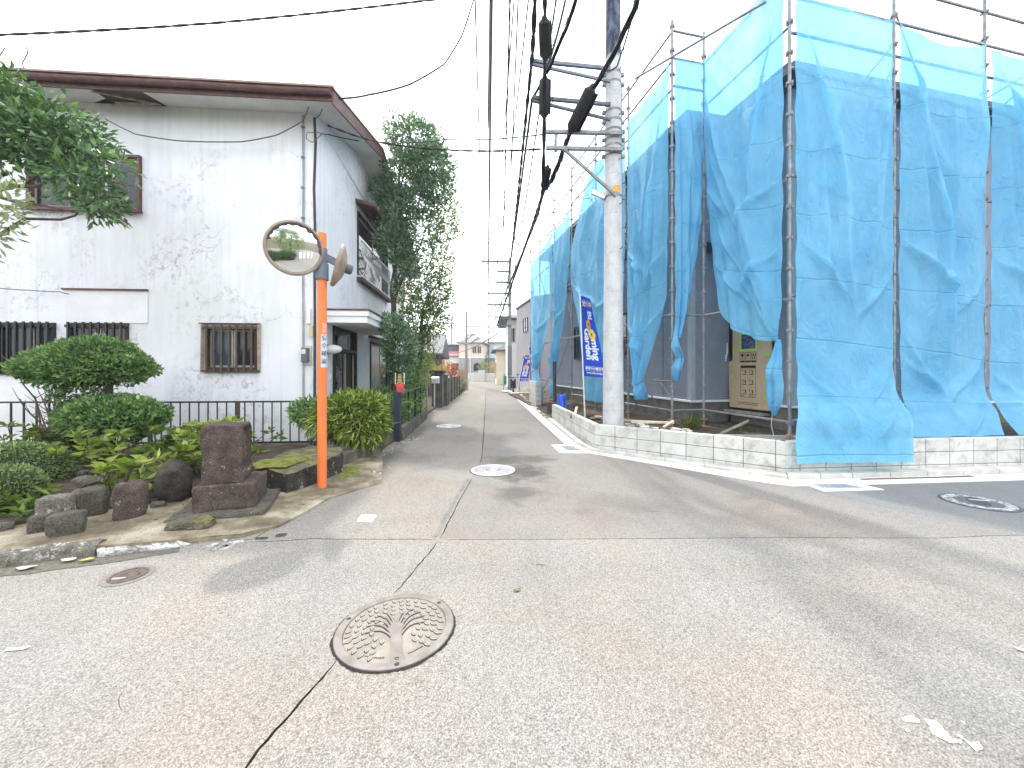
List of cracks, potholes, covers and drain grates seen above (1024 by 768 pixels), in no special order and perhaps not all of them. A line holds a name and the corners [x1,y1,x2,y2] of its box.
manhole cover [470,464,516,477]
manhole cover [98,565,156,587]
manhole cover [937,493,1024,513]
drain grate [551,444,589,454]
drain grate [802,483,884,492]
manhole cover [329,593,456,674]
